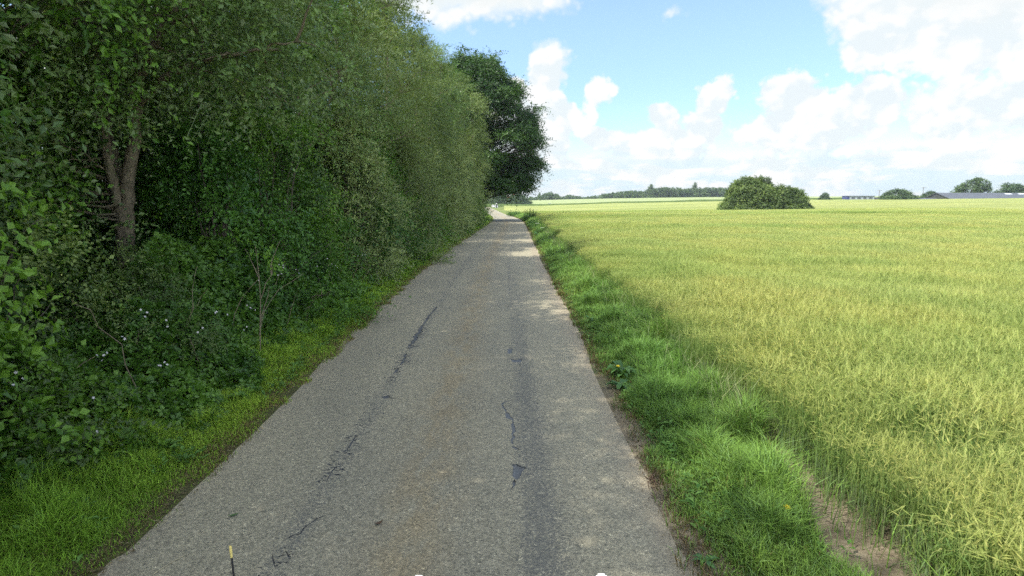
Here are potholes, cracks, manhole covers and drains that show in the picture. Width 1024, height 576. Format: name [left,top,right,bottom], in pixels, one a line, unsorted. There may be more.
crack [501,400,519,450]
crack [257,515,326,576]
